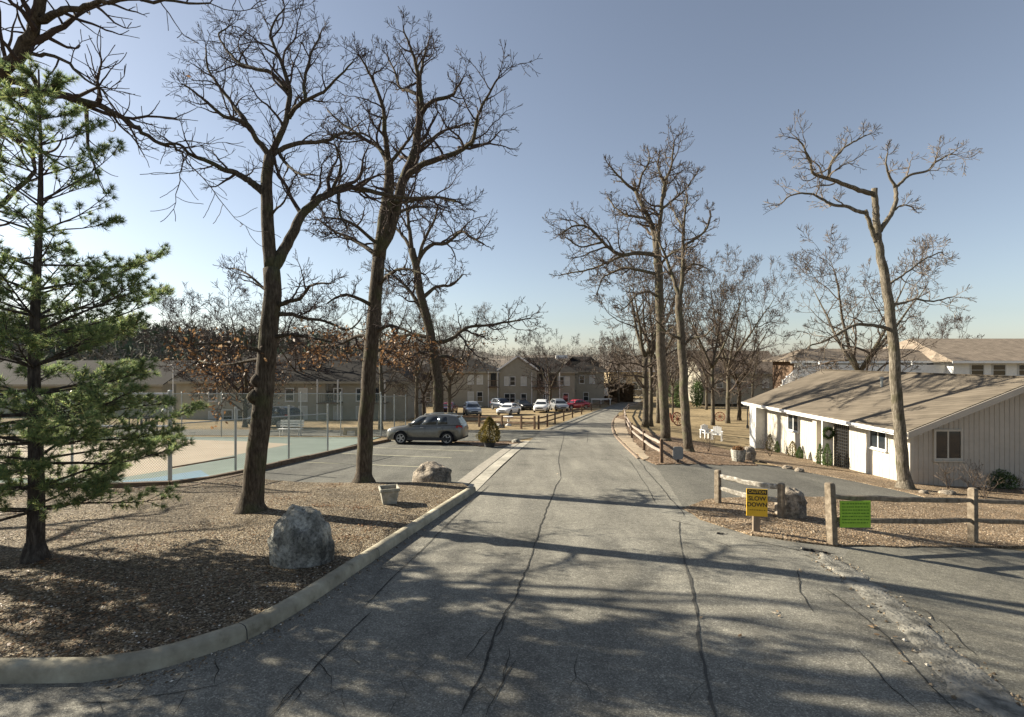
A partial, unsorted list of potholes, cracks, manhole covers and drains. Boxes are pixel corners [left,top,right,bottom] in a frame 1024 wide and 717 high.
crack [797,570,973,714]
crack [270,487,487,715]
crack [461,432,565,715]
